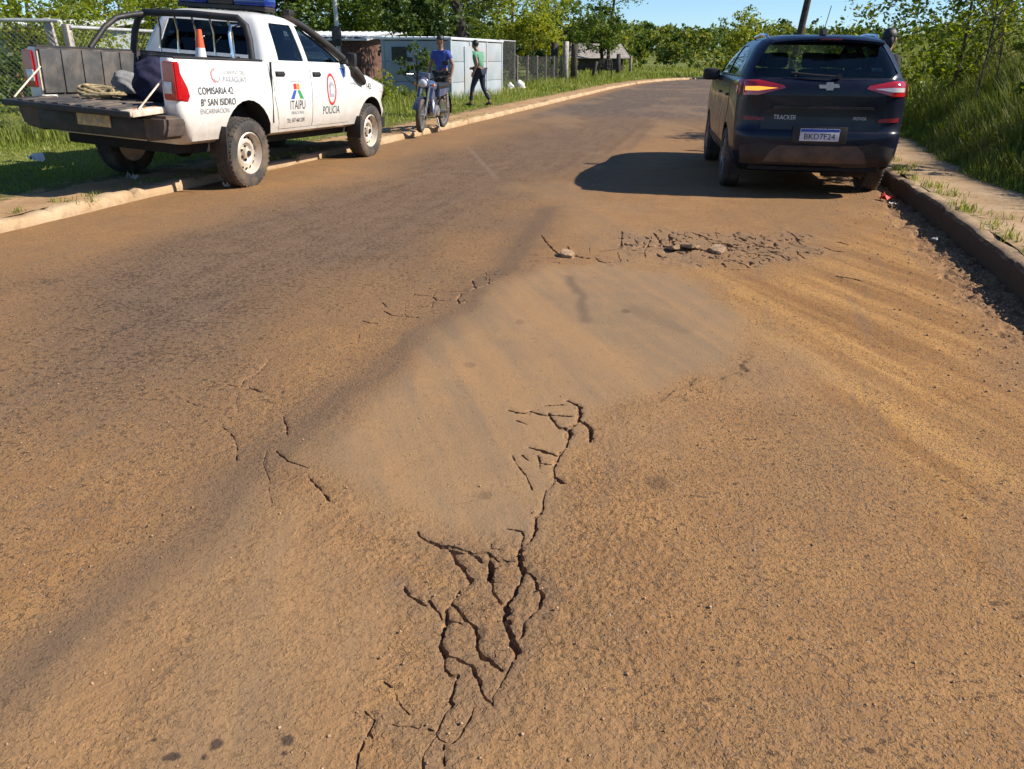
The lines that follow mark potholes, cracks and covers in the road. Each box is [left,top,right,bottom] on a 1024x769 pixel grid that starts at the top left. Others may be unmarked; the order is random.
crack [185,359,270,467]
crack [358,260,538,342]
crack [354,400,594,769]
crack [262,416,331,503]
